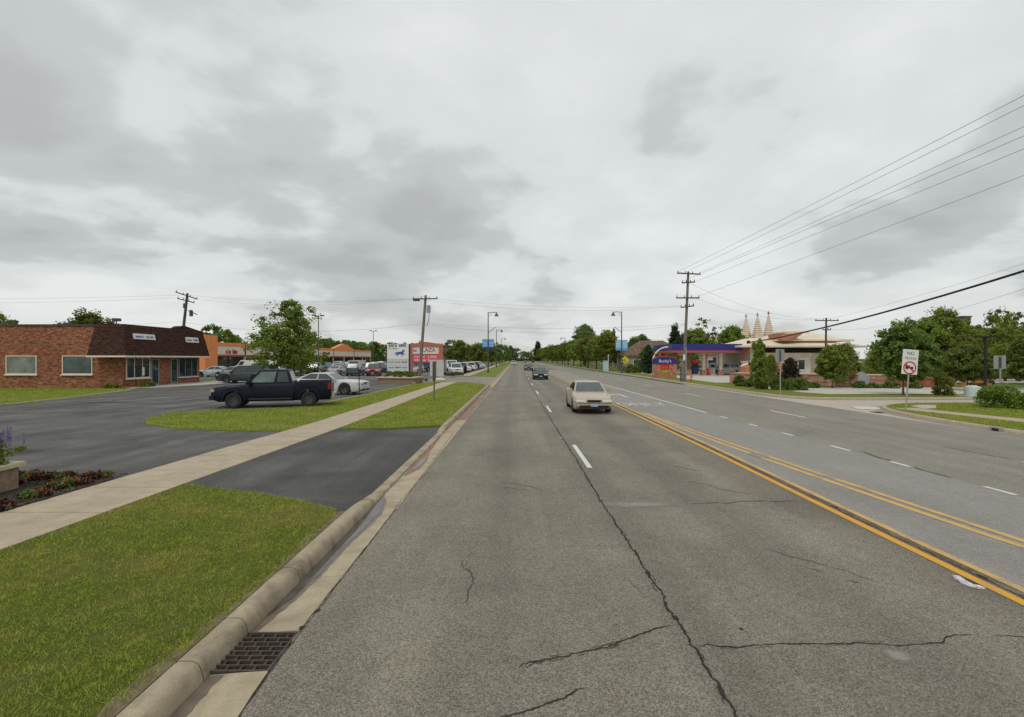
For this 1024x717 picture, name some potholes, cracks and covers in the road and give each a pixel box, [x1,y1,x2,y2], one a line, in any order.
crack [500,687,588,717]
drain grate [210,632,299,675]
crack [695,634,972,648]
crack [518,625,669,668]
